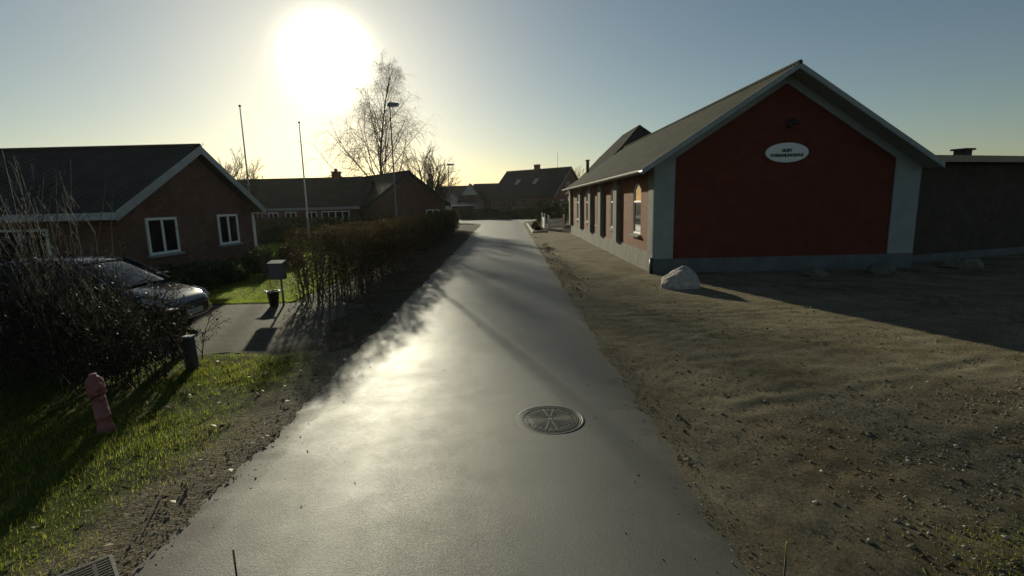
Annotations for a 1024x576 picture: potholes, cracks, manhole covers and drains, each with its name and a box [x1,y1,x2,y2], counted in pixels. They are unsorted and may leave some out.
drain grate [57,554,120,576]
manhole cover [516,405,584,435]
